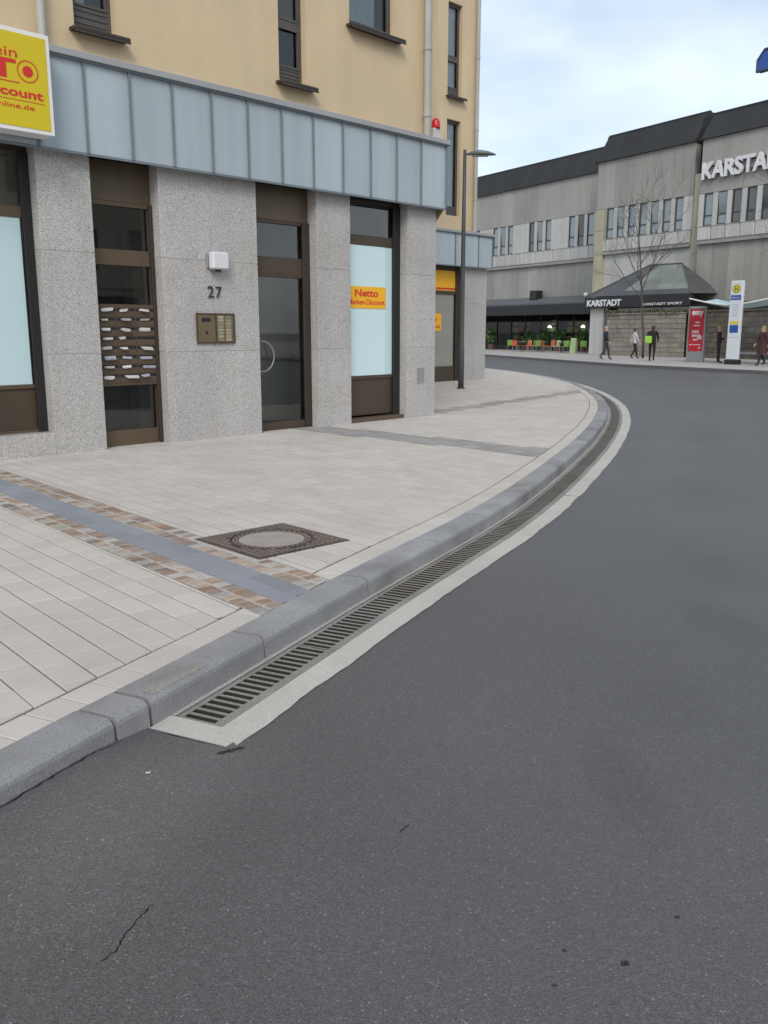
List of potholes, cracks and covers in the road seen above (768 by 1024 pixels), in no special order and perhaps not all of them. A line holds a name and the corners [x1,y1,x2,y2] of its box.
manhole cover [195,523,349,560]
crack [94,904,153,967]
